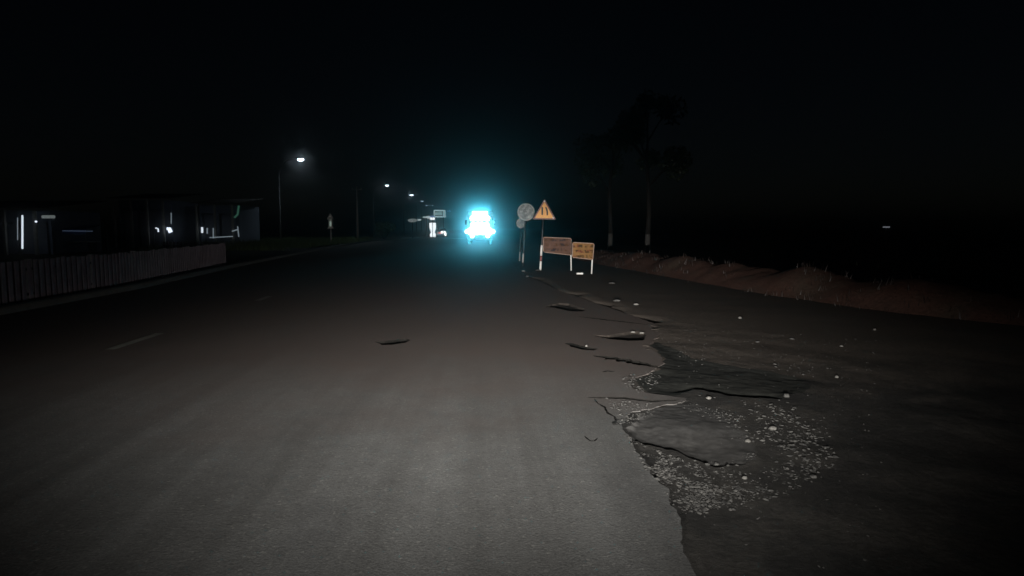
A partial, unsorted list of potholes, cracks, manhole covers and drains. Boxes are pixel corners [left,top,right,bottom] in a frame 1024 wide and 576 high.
pothole [594,331,646,341]
crack [578,316,647,325]
pothole [625,404,756,467]
pothole [546,303,585,311]
crack [585,397,676,441]
crack [592,355,659,372]
pothole [637,342,811,399]
